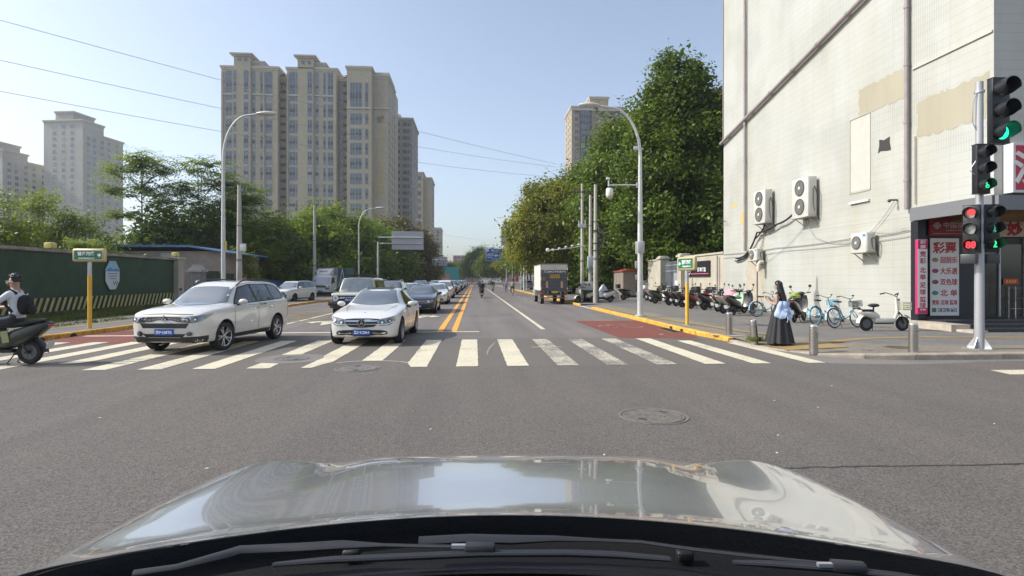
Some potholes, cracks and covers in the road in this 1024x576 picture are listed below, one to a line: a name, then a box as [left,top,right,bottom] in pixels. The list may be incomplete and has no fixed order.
manhole cover [255,354,324,364]
manhole cover [618,408,689,425]
